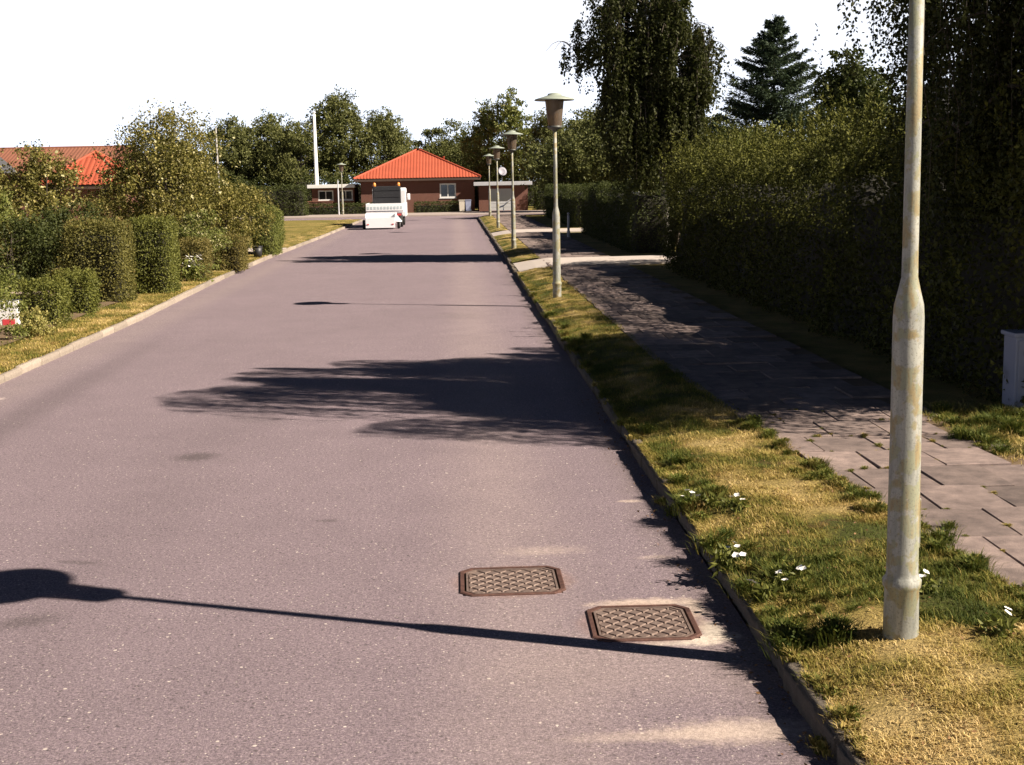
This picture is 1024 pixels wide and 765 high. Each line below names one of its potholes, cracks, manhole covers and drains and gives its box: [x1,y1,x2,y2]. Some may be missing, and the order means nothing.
manhole cover [586,604,702,642]
manhole cover [459,566,566,597]
